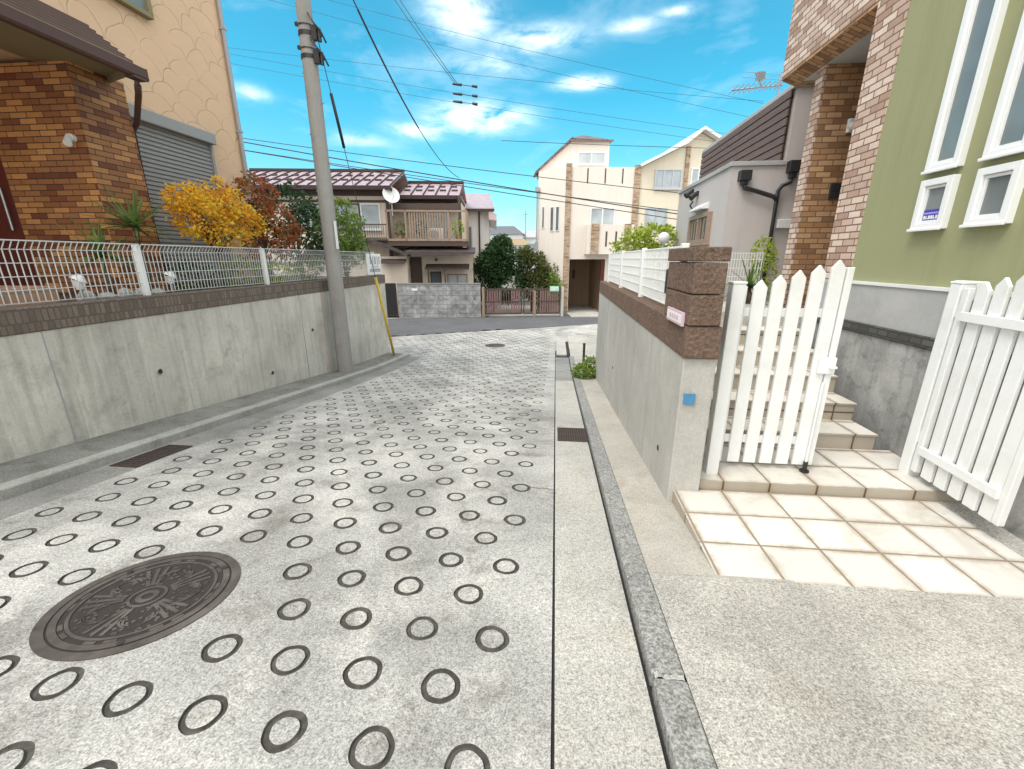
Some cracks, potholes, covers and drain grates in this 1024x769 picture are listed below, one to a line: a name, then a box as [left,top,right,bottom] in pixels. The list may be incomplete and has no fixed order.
manhole cover [29,551,241,662]
drain grate [109,444,193,468]
drain grate [557,427,588,442]
